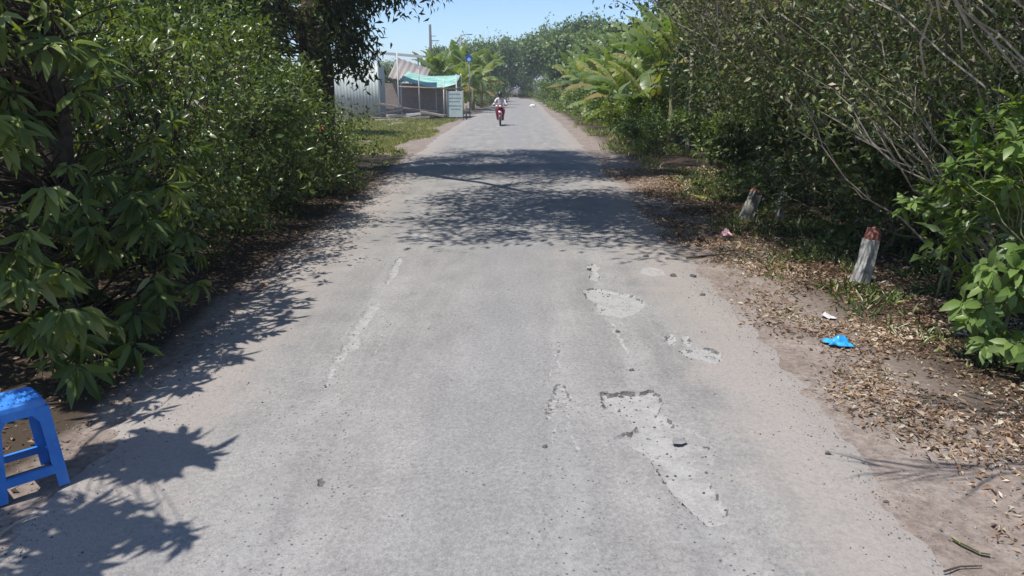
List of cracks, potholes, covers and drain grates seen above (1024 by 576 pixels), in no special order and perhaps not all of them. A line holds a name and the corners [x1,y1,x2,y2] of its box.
pothole [664,334,723,364]
pothole [582,288,647,318]
crack [604,318,629,355]
pothole [544,383,572,420]
pothole [600,390,731,527]
